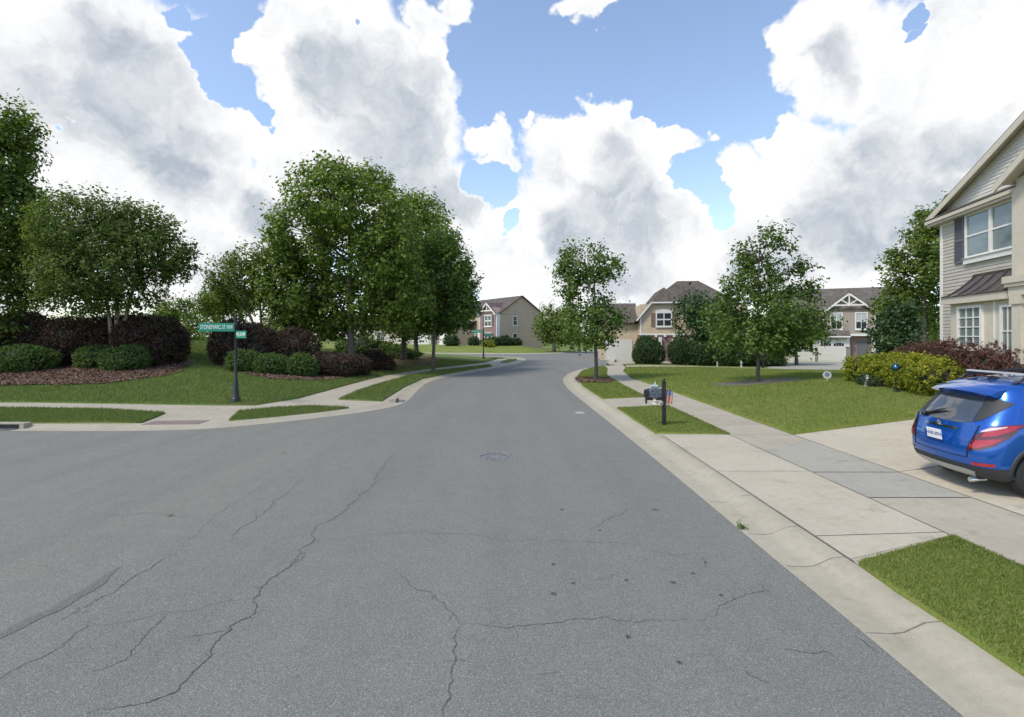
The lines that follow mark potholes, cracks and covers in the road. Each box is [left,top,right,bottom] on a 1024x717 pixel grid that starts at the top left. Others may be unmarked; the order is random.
manhole cover [478,452,515,461]
crack [348,499,663,553]
drain grate [0,422,33,431]
crack [463,586,766,634]
crack [395,571,465,717]
crack [0,427,391,713]
